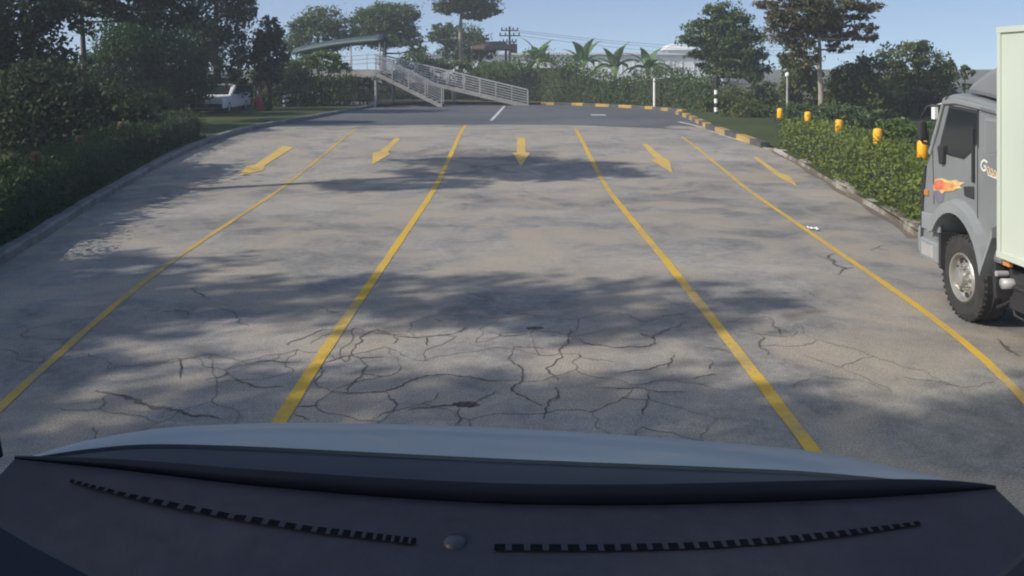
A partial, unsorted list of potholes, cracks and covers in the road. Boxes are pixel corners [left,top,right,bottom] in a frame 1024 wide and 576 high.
crack [819,253,854,274]
crack [174,287,249,326]
crack [733,316,993,391]
crack [997,339,1019,356]
crack [2,300,729,441]
